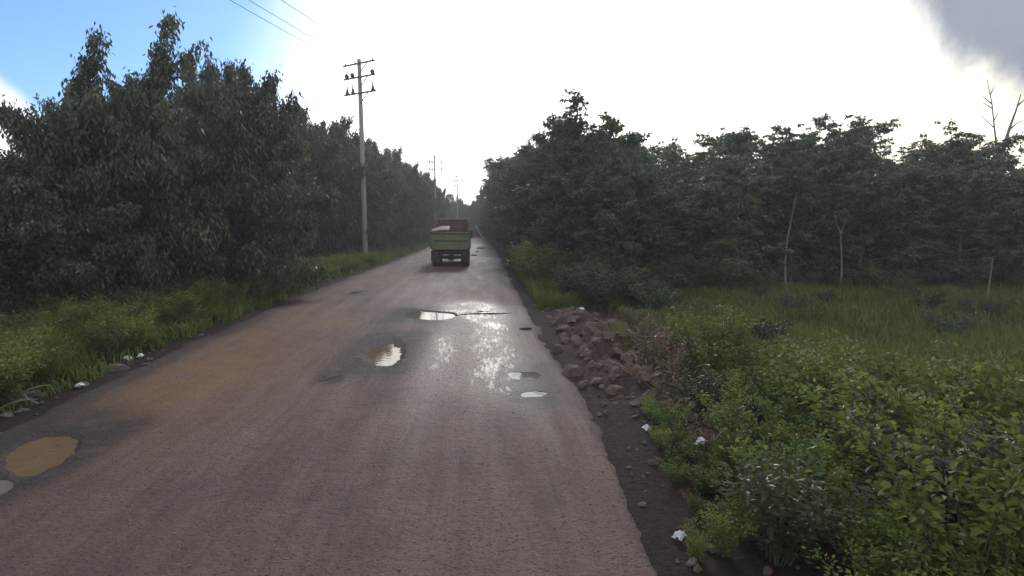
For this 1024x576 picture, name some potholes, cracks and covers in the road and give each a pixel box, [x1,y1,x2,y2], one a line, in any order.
pothole [357,335,408,369]
pothole [390,308,459,320]
pothole [0,428,87,481]
pothole [0,478,15,494]
